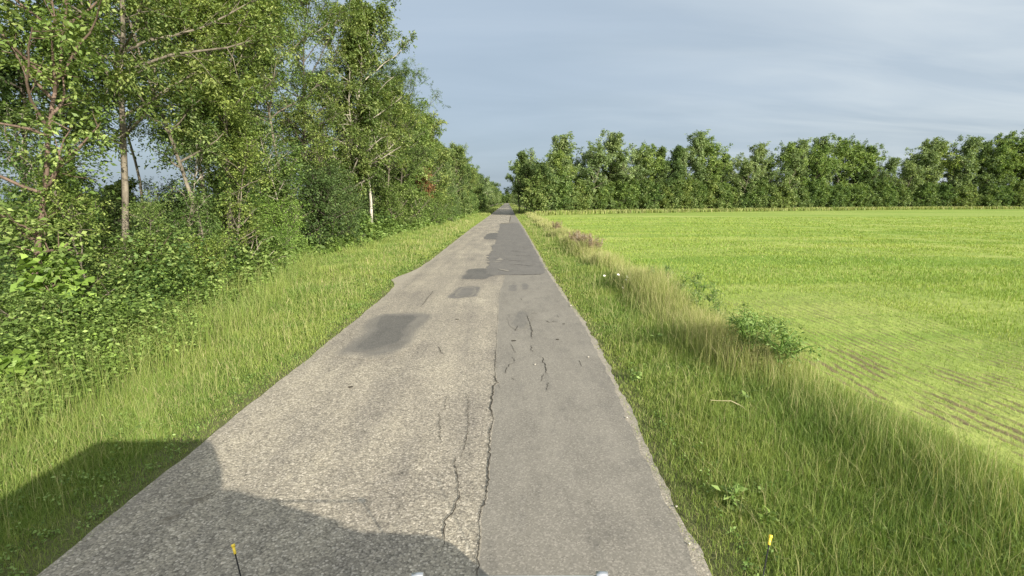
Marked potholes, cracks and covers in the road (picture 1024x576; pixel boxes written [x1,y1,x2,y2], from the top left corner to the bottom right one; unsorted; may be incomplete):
crack [438,393,470,552]
crack [478,352,513,521]
